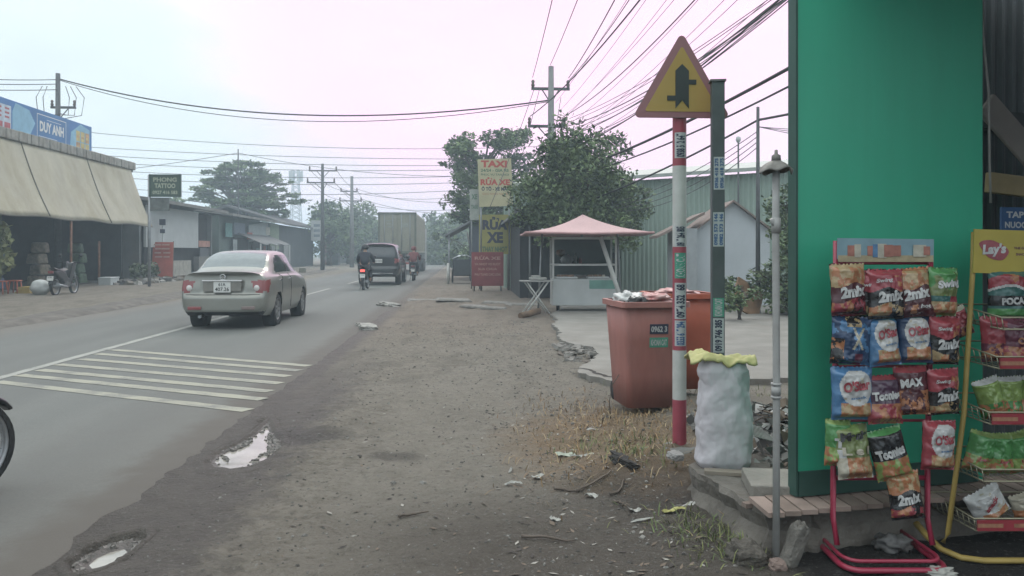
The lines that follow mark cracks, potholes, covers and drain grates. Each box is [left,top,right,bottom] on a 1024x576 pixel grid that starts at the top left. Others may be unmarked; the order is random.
pothole [193,414,290,476]
pothole [52,524,158,576]
pothole [551,342,597,362]
